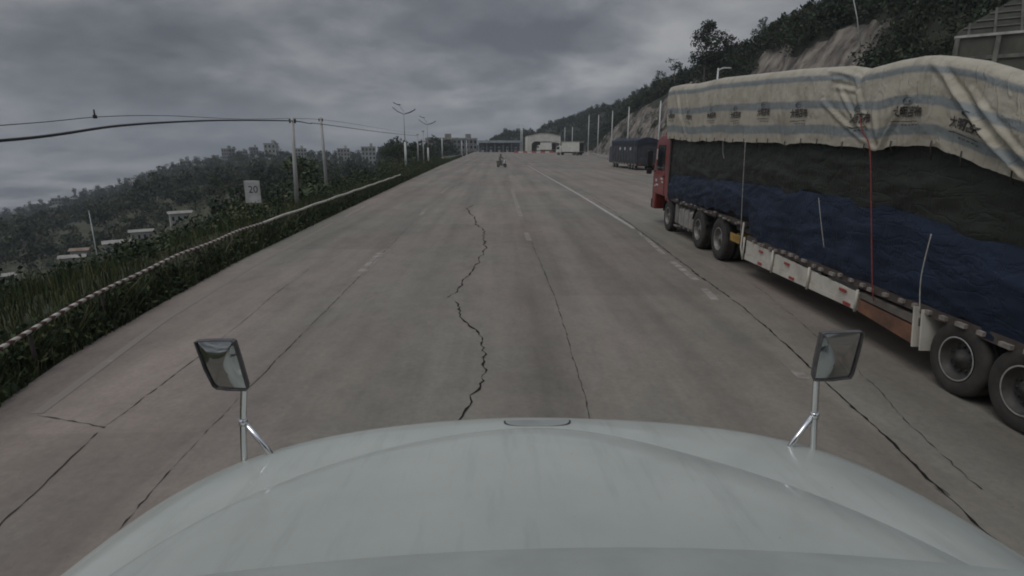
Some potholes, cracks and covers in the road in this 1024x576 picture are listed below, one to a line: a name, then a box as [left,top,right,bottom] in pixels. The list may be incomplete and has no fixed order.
crack [533,247,590,419]
crack [619,216,997,540]
crack [448,205,488,420]
